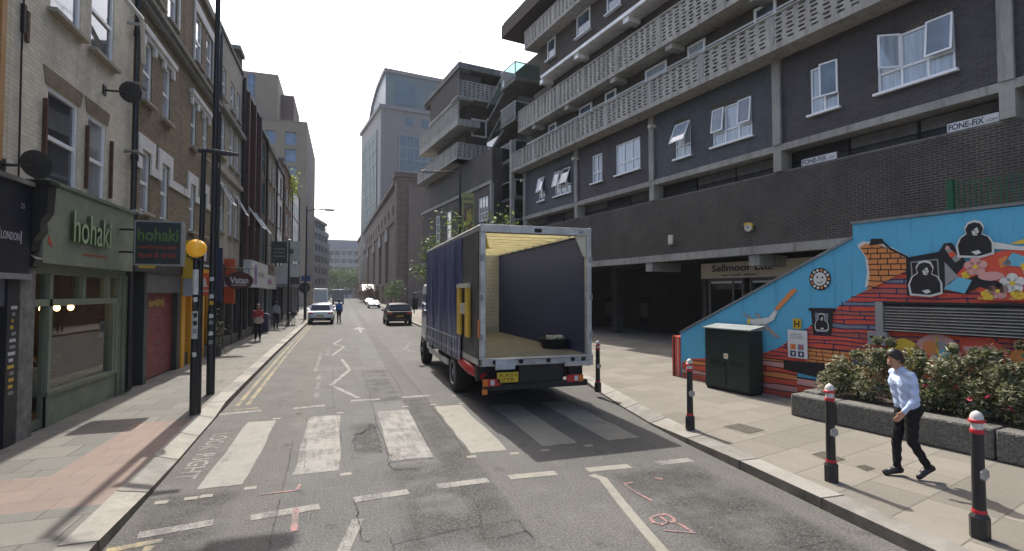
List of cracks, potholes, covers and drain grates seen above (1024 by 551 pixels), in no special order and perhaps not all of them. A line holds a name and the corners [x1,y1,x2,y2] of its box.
crack [268,418,307,551]
pothole [344,420,390,460]
crack [390,468,483,549]
